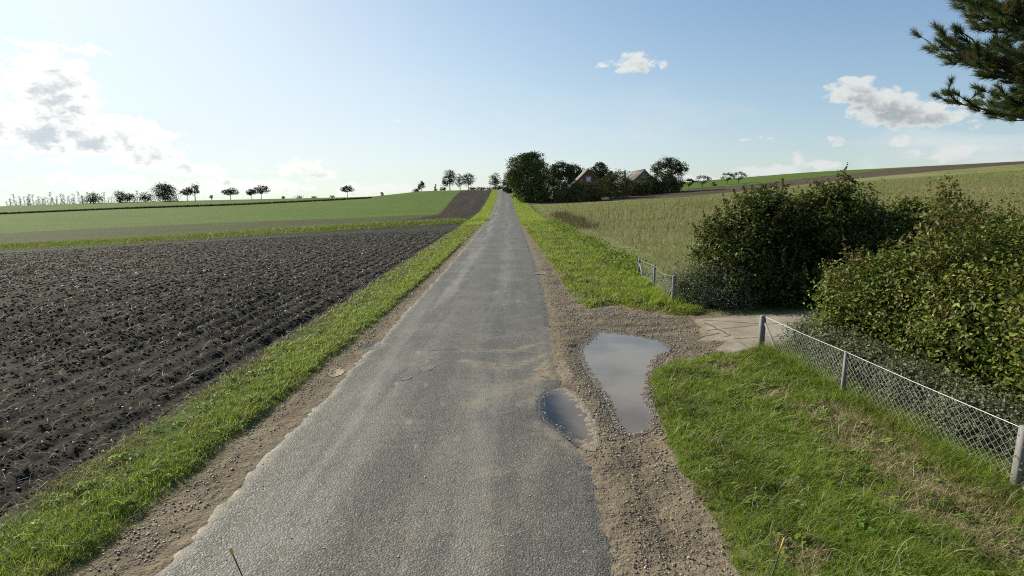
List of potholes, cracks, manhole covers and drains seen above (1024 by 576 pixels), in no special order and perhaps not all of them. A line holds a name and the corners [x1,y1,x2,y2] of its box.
pothole [536,388,601,451]
crack [701,322,749,348]
pothole [576,331,672,437]
